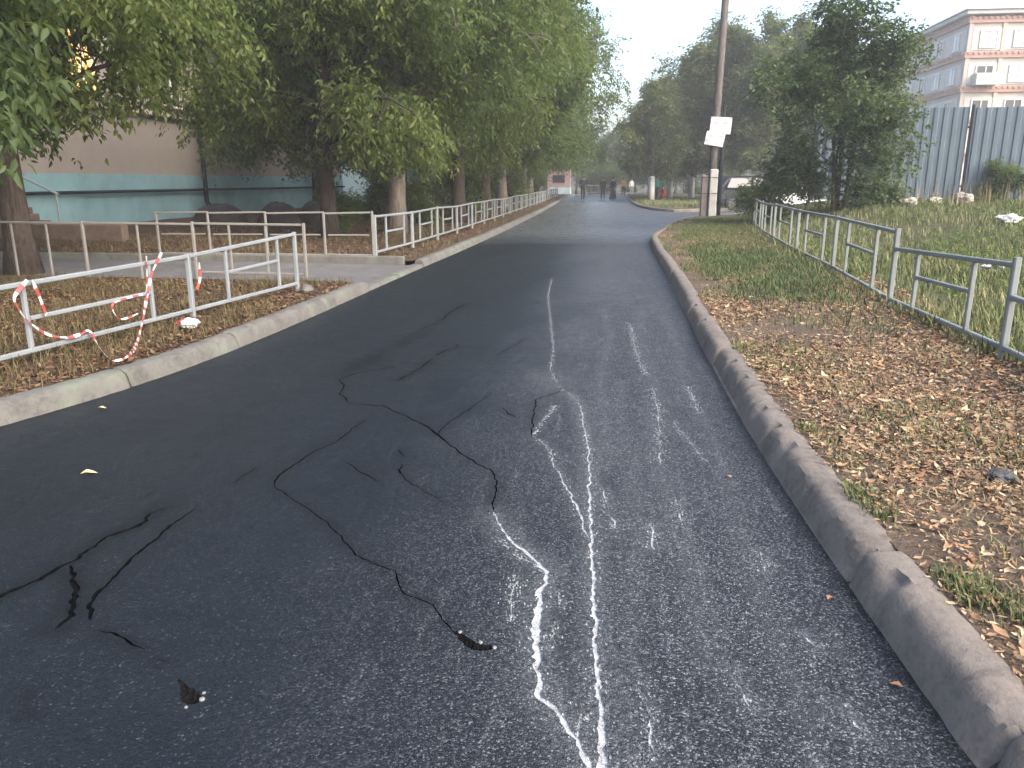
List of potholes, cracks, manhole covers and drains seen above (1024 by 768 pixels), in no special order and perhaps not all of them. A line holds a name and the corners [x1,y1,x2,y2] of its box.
pothole [177,679,206,709]
crack [339,278,693,768]
pothole [452,630,497,651]
crack [0,508,197,662]
crack [234,419,453,631]
